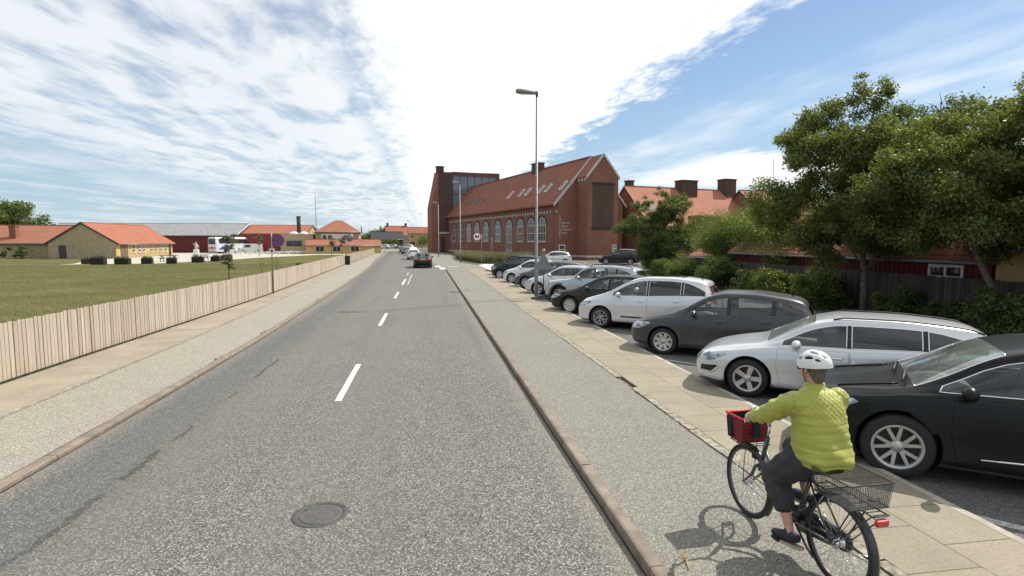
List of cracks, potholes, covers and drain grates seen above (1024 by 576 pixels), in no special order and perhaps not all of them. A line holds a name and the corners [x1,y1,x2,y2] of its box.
manhole cover [291,501,348,528]
